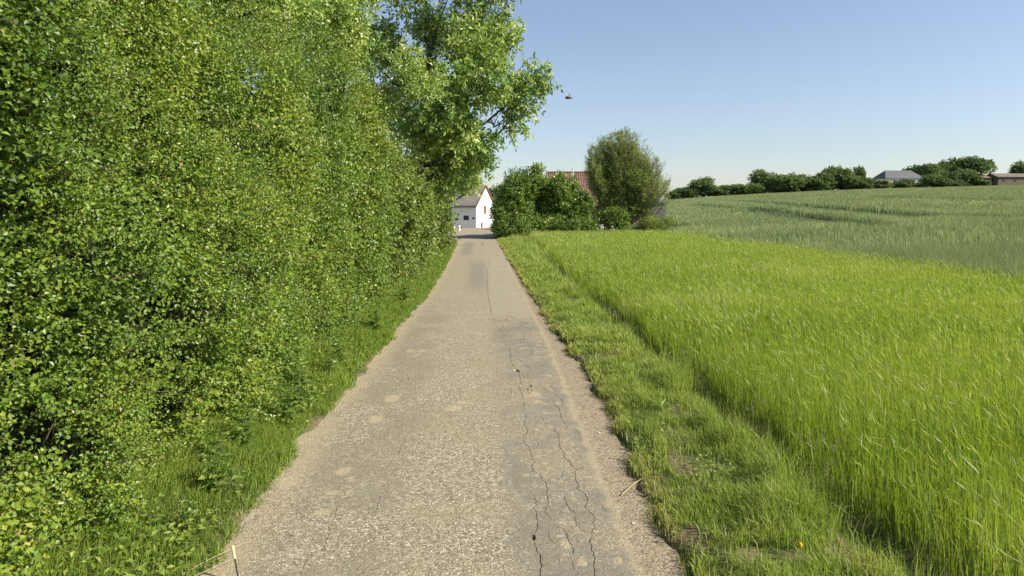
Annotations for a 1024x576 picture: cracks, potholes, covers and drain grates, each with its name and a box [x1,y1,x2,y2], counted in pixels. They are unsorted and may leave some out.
crack [495,316,606,576]
